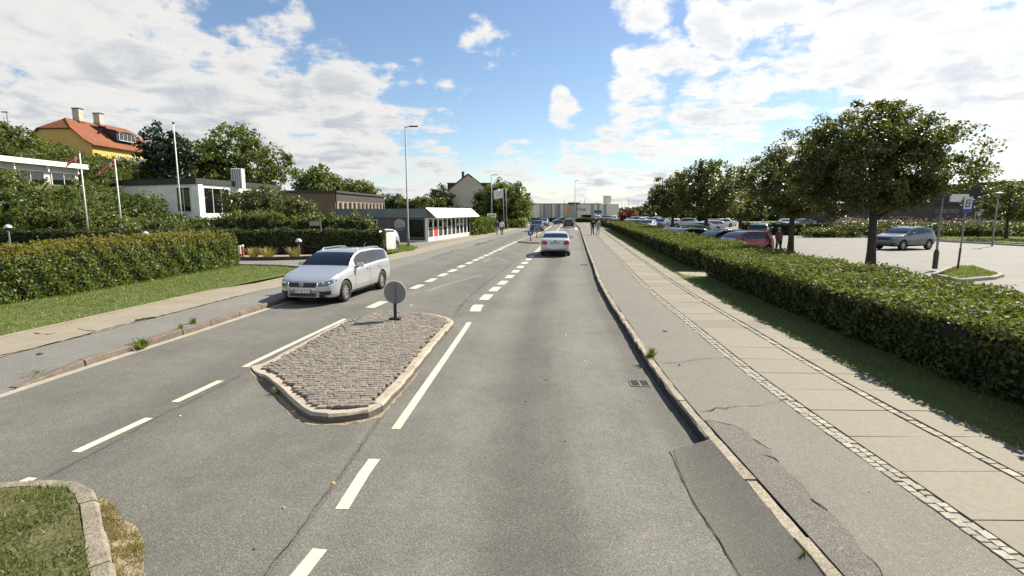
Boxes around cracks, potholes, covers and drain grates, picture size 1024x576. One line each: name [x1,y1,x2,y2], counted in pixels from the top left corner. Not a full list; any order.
crack [704,399,788,462]
